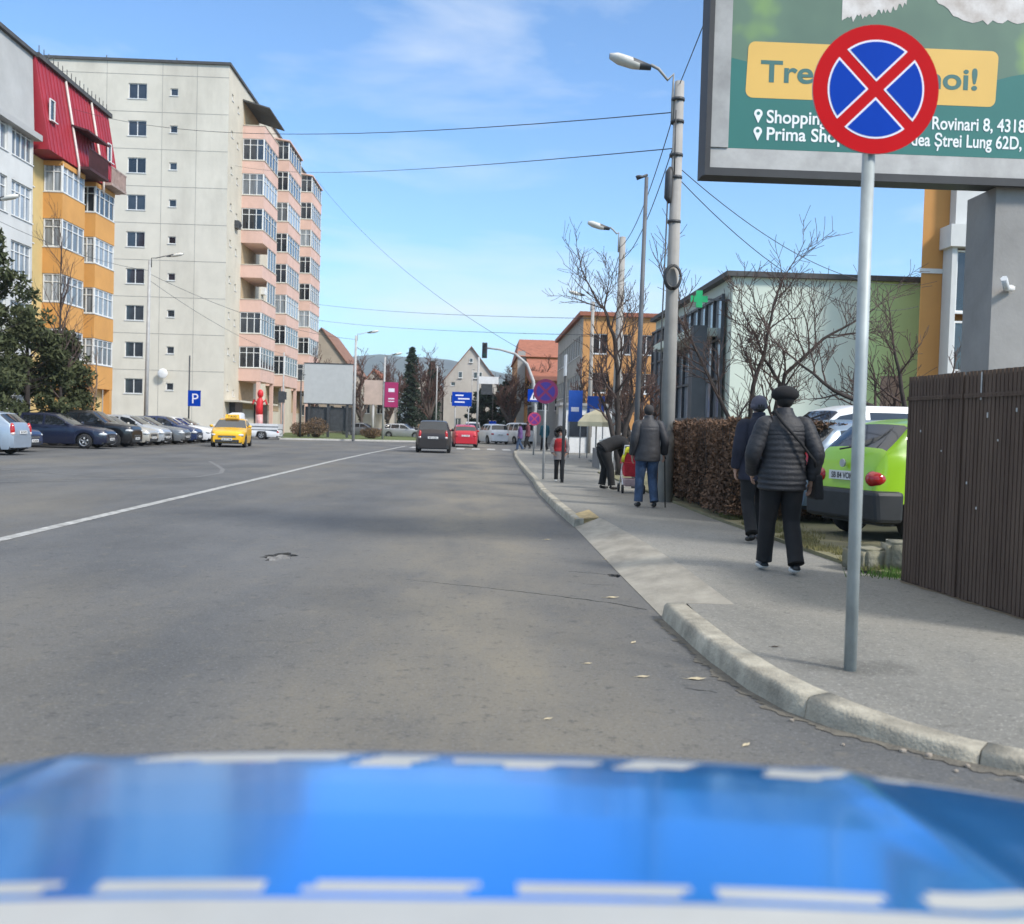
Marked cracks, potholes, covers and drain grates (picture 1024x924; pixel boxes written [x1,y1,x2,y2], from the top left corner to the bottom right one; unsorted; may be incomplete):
pothole [263,552,298,561]
crack [415,571,647,610]
